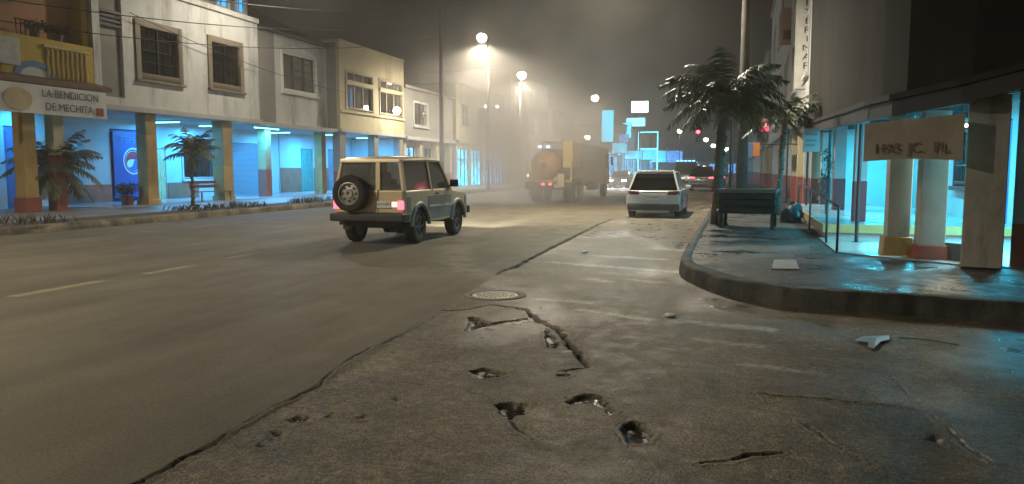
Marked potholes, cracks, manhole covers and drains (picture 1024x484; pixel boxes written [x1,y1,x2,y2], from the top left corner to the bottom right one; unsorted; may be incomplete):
pothole [559,392,625,417]
pothole [487,400,548,442]
pothole [539,326,566,350]
pothole [614,419,663,447]
pothole [459,315,533,332]
manhole cover [464,290,526,301]
crack [440,304,595,375]
crack [691,373,1004,467]
pothole [464,366,516,380]
